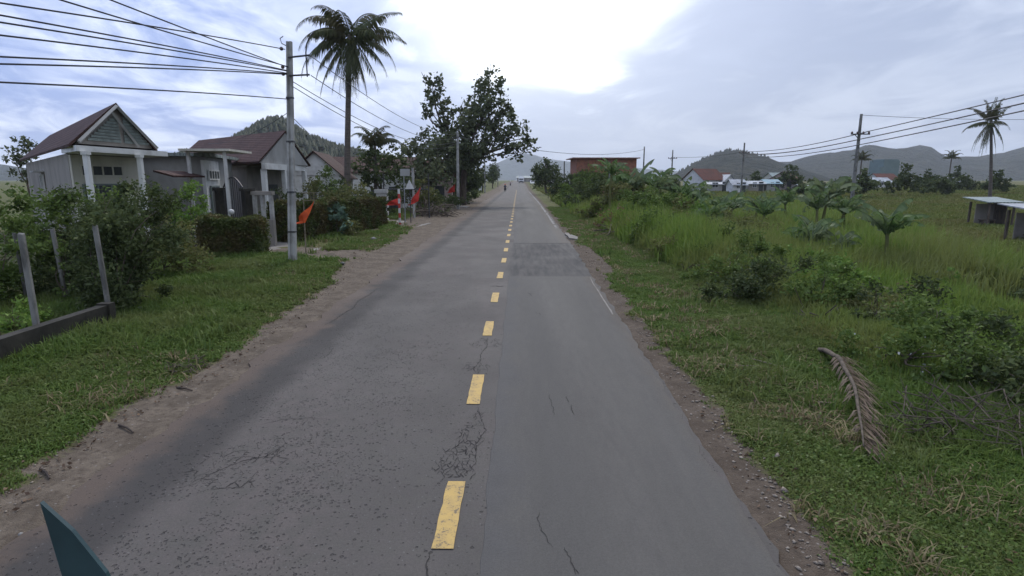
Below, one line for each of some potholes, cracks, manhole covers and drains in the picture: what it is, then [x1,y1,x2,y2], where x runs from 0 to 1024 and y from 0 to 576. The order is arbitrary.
crack [462,338,501,374]
crack [537,513,579,574]
crack [184,434,324,489]
crack [432,410,487,481]
